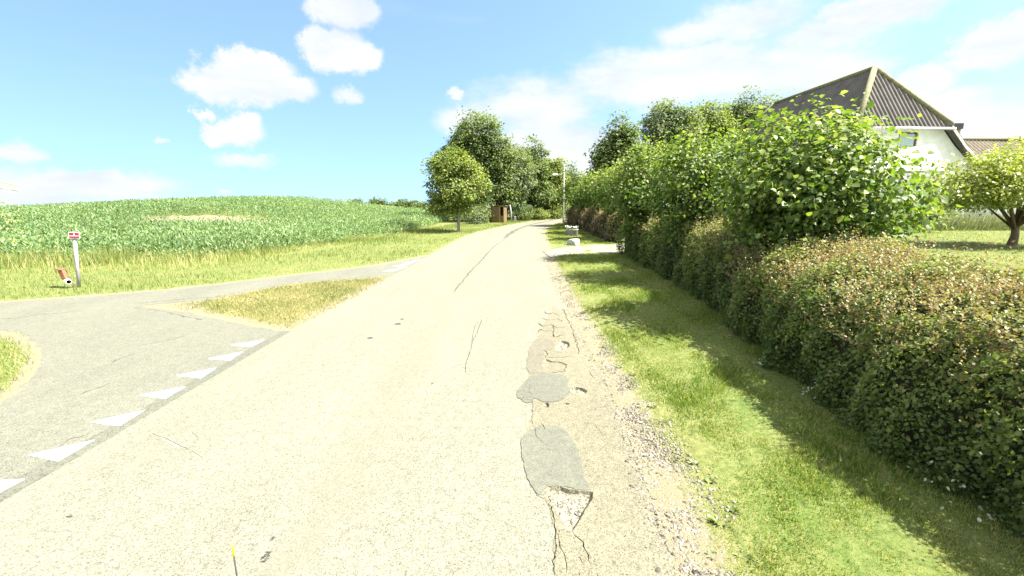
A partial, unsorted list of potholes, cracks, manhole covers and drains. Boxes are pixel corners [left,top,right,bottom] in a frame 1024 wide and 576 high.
pothole [546,487,593,532]
pothole [555,341,570,351]
crack [557,531,590,573]
crack [537,310,579,373]
